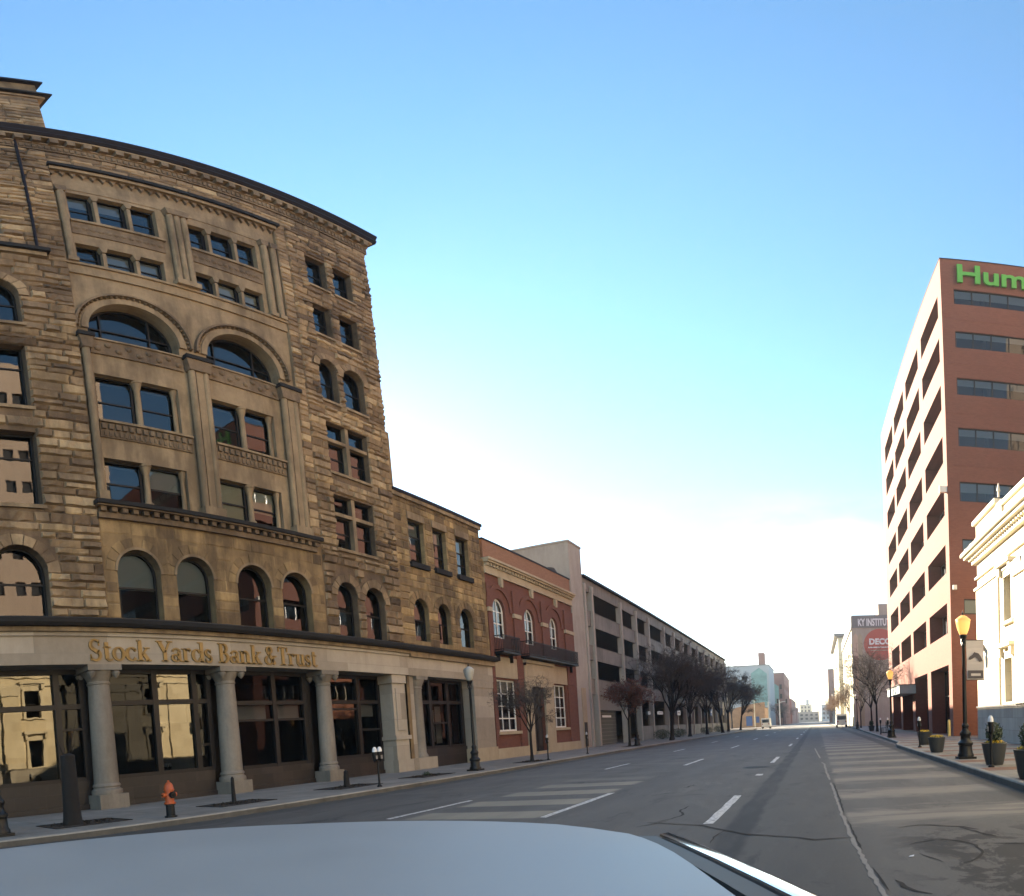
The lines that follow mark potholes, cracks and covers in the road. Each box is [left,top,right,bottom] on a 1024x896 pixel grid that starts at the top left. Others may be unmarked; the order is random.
crack [638,806,848,843]
crack [899,824,1024,863]
